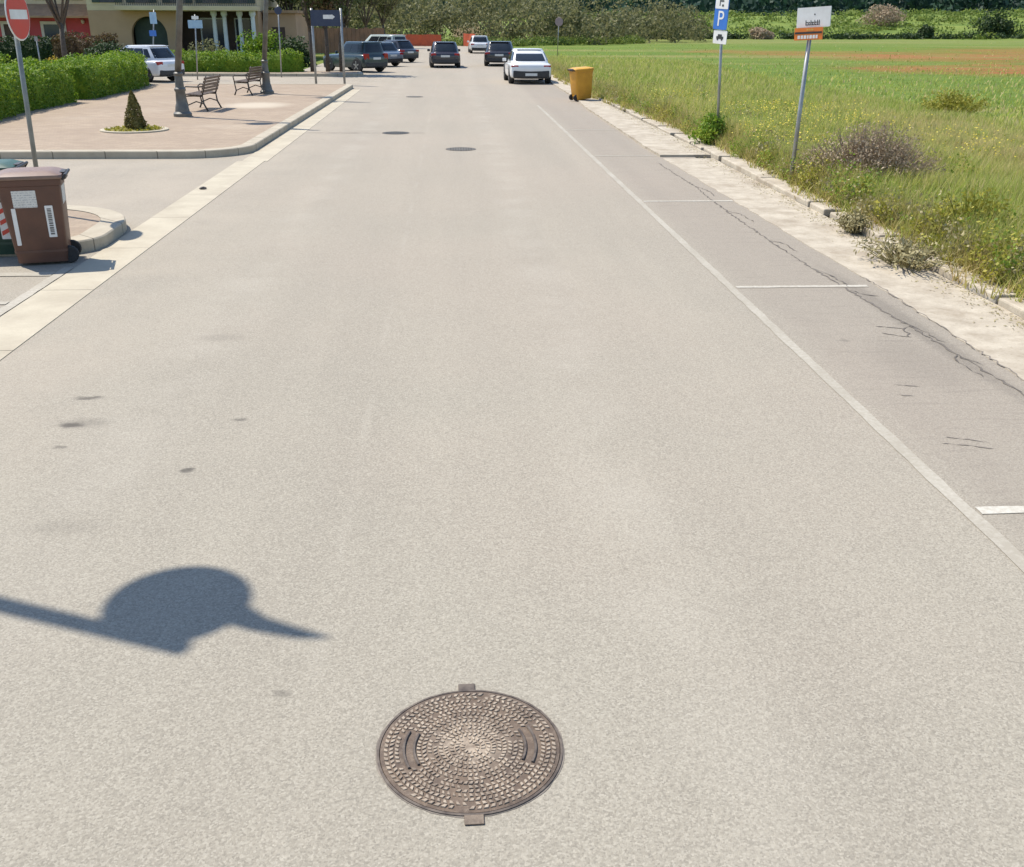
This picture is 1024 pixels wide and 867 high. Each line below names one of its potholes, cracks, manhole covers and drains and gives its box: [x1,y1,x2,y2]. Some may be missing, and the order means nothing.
crack [659,163,1024,395]
manhole cover [376,683,565,826]
